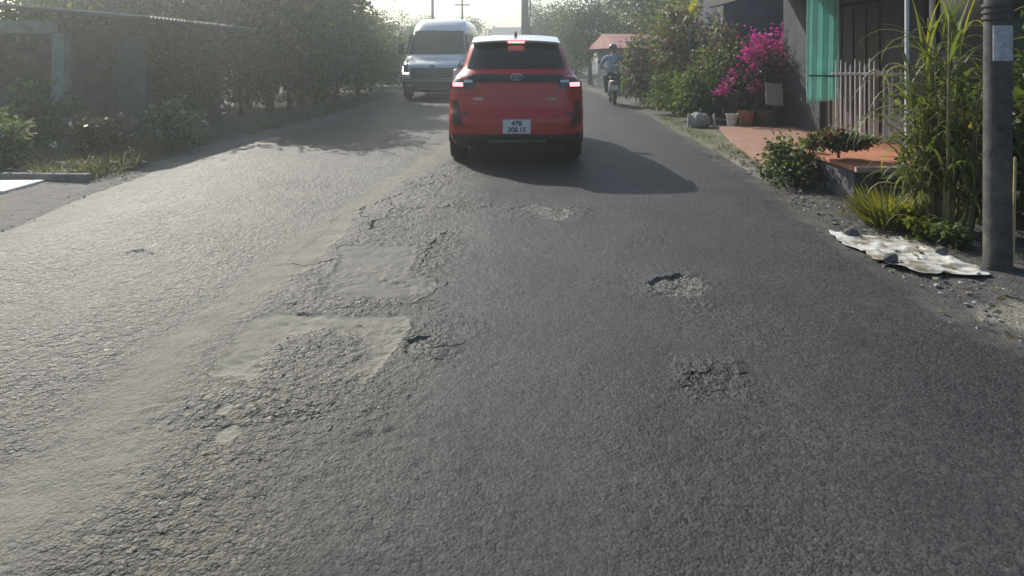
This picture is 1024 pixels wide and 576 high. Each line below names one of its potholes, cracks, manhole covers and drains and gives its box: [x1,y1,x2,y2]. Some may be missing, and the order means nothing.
pothole [404,335,438,355]
crack [352,174,485,231]
crack [342,281,448,309]
crack [418,229,449,269]
pothole [647,273,708,298]
